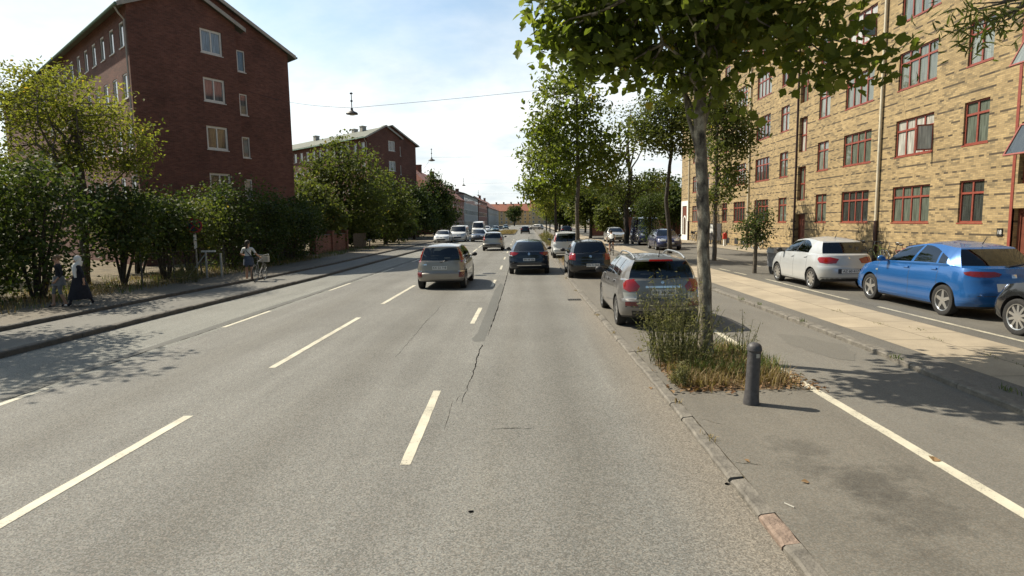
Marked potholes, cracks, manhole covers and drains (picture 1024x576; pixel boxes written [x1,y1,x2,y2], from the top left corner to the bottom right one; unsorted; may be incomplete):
crack [444,345,483,429]
